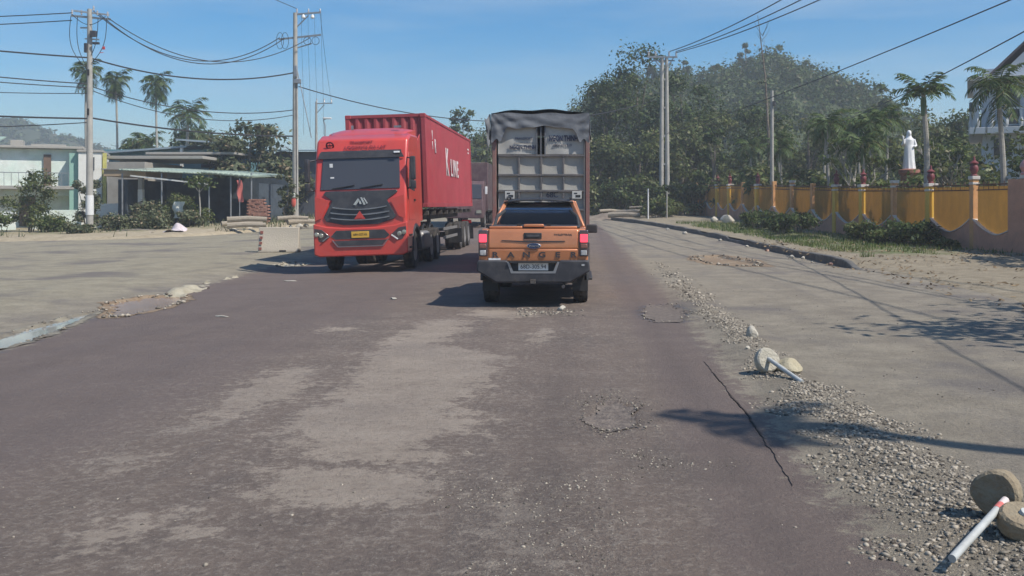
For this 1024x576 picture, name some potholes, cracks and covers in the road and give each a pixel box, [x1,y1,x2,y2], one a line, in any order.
pothole [580,393,653,433]
crack [704,362,793,485]
pothole [639,303,691,323]
pothole [688,254,774,267]
pothole [97,293,197,319]
